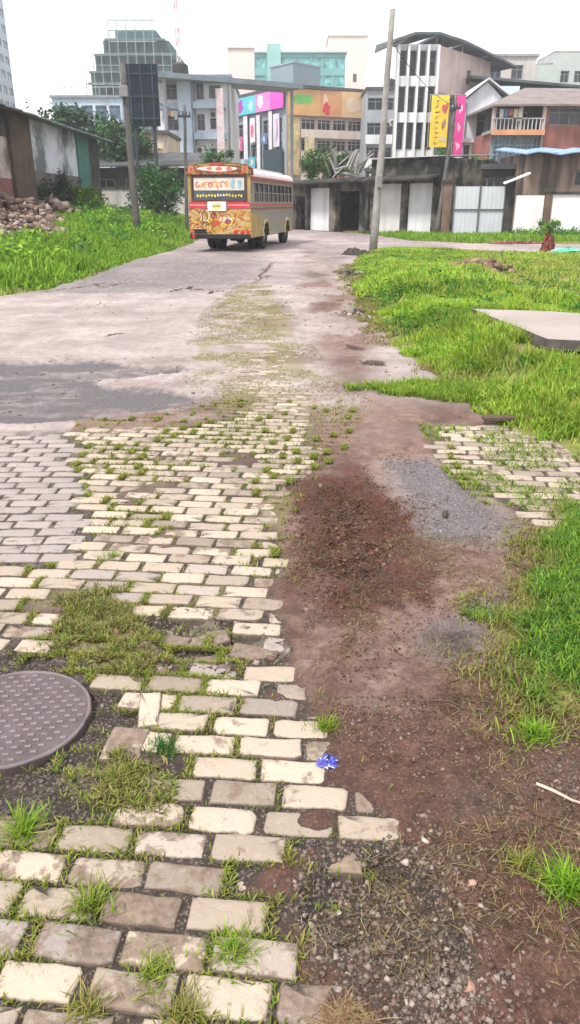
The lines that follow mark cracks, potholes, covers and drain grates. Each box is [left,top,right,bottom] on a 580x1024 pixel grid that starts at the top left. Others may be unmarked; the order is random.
manhole cover [0,671,93,777]
crack [168,262,275,294]
